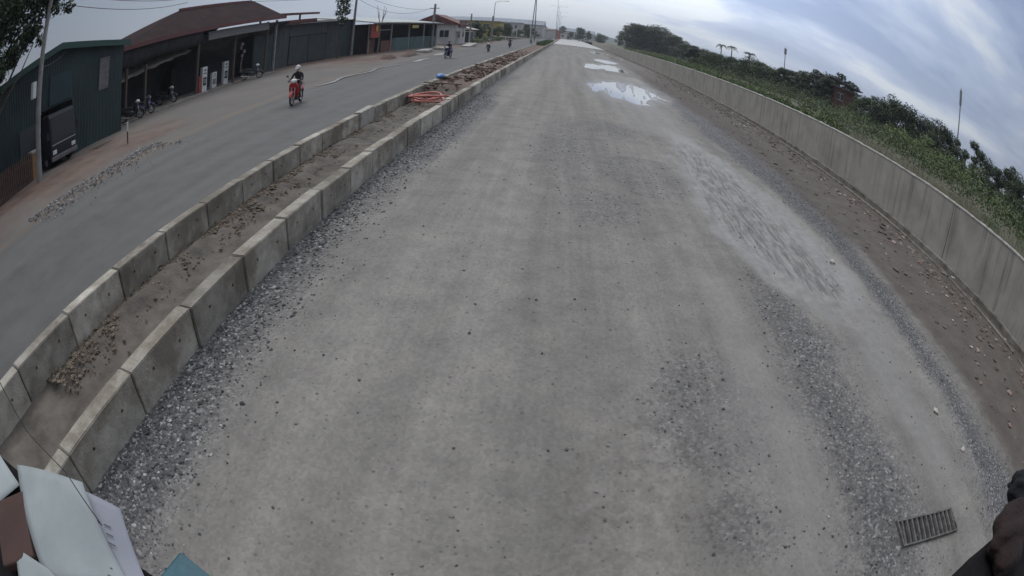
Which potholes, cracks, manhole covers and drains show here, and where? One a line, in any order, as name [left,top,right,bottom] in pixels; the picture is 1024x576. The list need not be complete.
drain grate [896,507,958,548]
